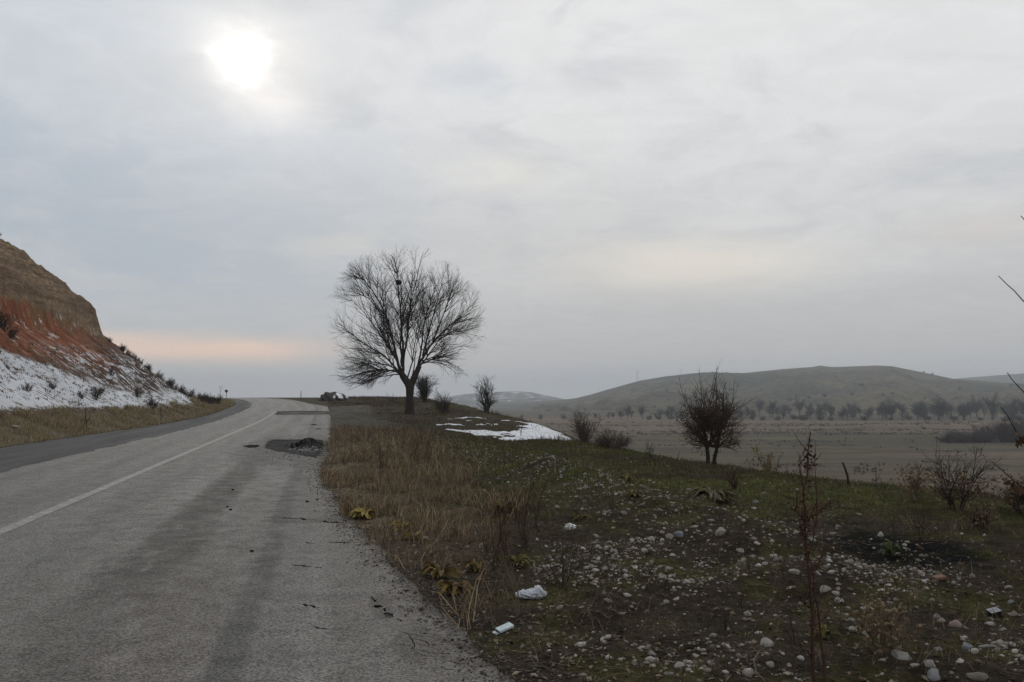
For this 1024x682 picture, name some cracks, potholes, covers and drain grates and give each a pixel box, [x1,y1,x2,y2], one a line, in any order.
pothole [264,439,325,457]
